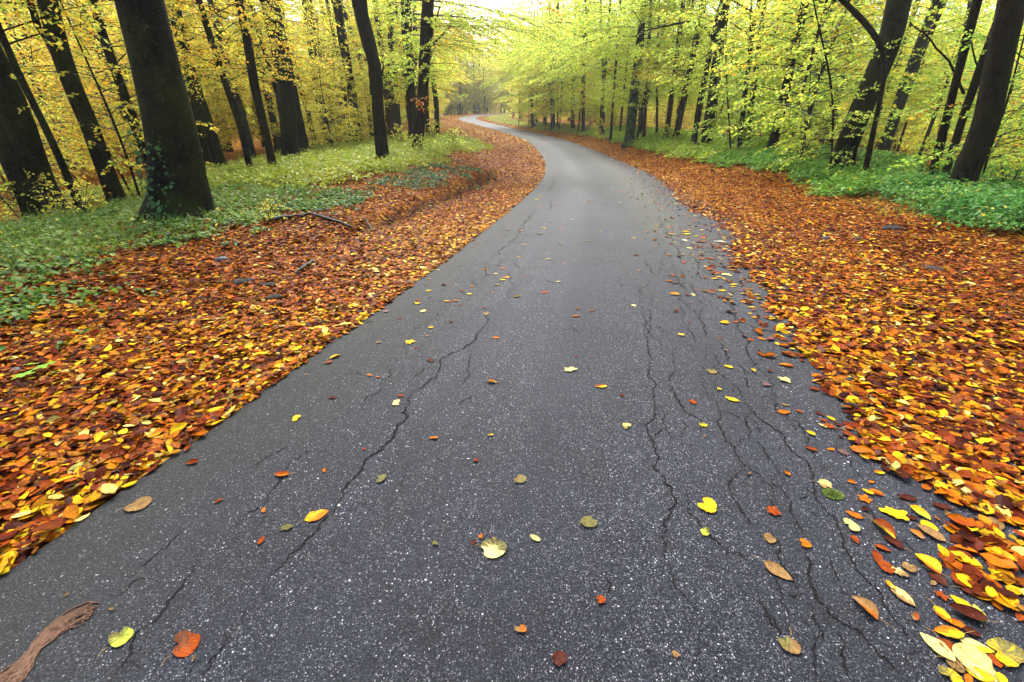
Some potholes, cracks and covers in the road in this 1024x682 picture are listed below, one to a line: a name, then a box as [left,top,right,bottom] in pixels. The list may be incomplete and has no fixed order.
crack [626,198,921,682]
crack [112,308,491,680]
